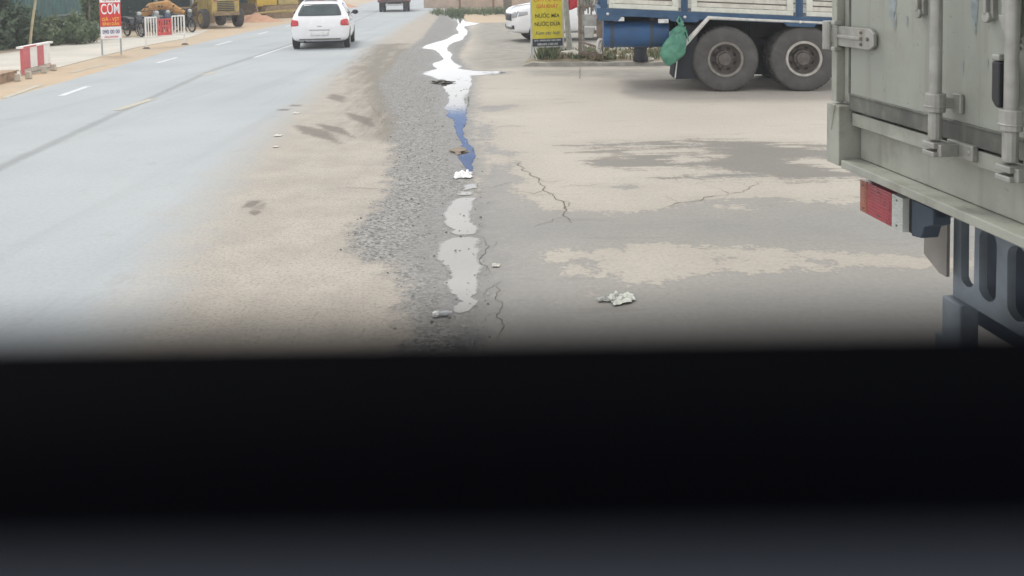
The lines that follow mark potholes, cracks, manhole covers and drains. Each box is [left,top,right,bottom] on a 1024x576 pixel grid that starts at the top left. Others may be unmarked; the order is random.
crack [486,161,596,225]
